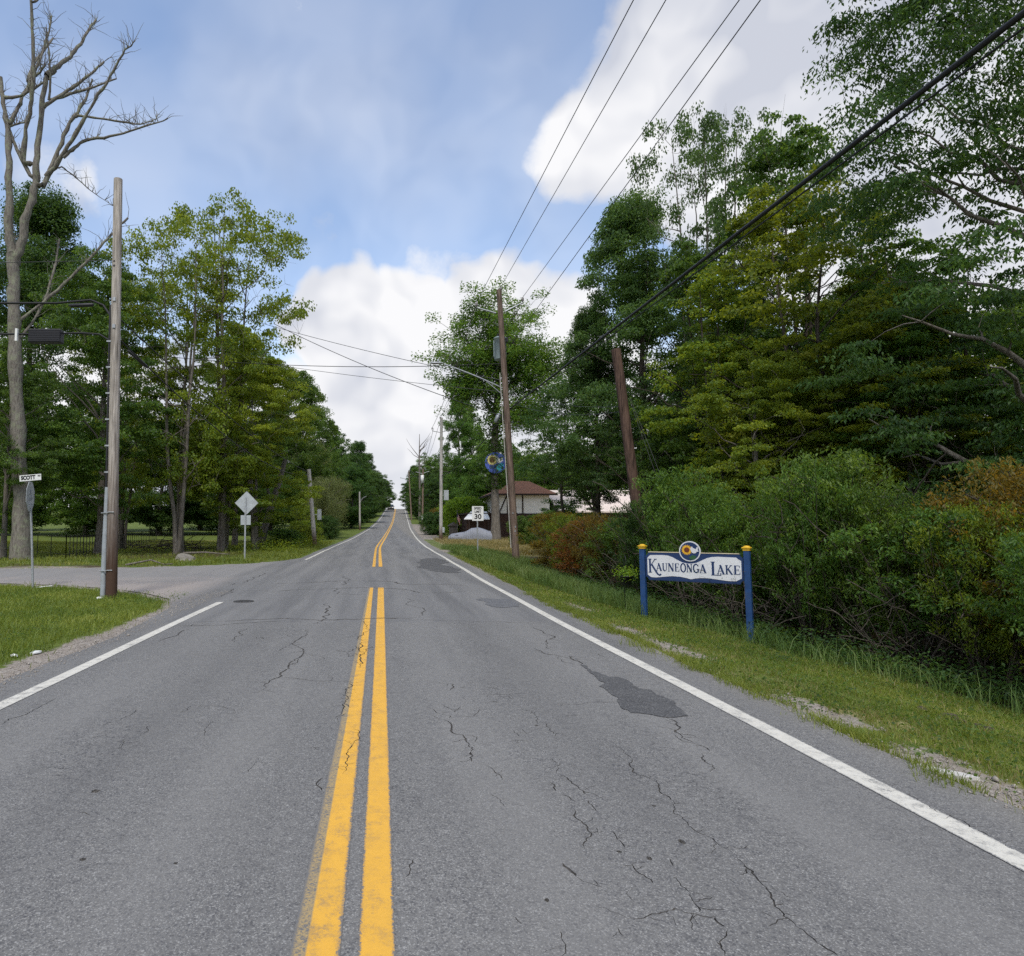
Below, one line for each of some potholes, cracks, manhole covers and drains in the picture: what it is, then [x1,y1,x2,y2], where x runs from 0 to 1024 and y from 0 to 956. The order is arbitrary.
crack [424,684,621,807]
crack [608,744,837,956]
crack [515,758,727,956]
crack [162,573,475,790]
crack [659,699,715,771]
